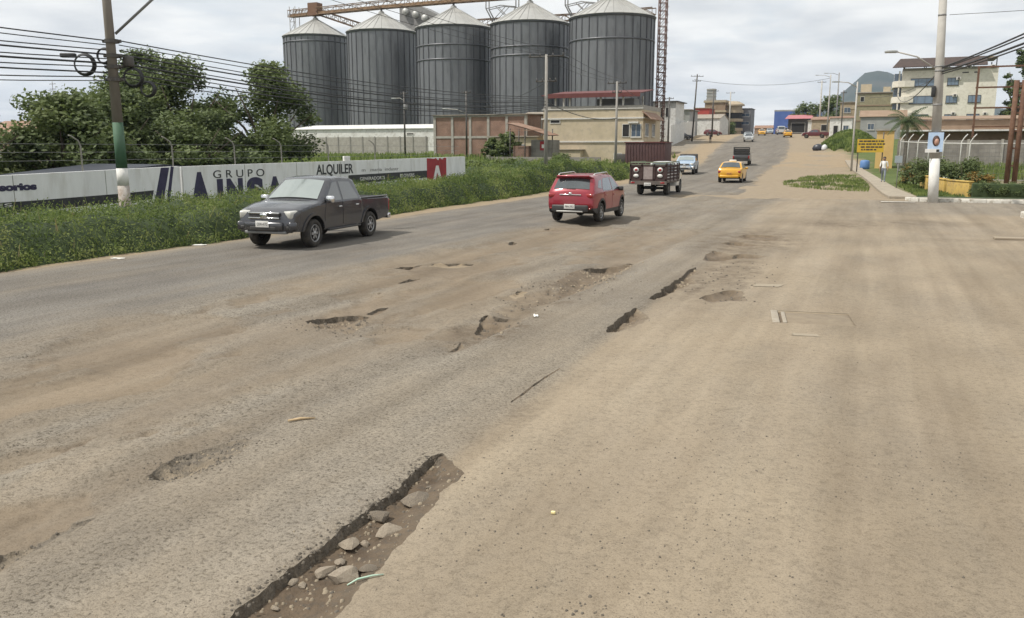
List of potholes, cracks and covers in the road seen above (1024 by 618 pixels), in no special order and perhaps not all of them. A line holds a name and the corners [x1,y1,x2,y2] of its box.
pothole [230,453,464,618]
crack [511,368,561,402]
pothole [556,264,633,301]
pothole [305,316,375,334]
pothole [703,251,768,262]
pothole [605,308,650,333]
pothole [473,315,522,341]
pothole [701,290,748,303]
manhole cover [770,310,855,326]
pothole [145,440,253,483]
pothole [649,267,699,300]
